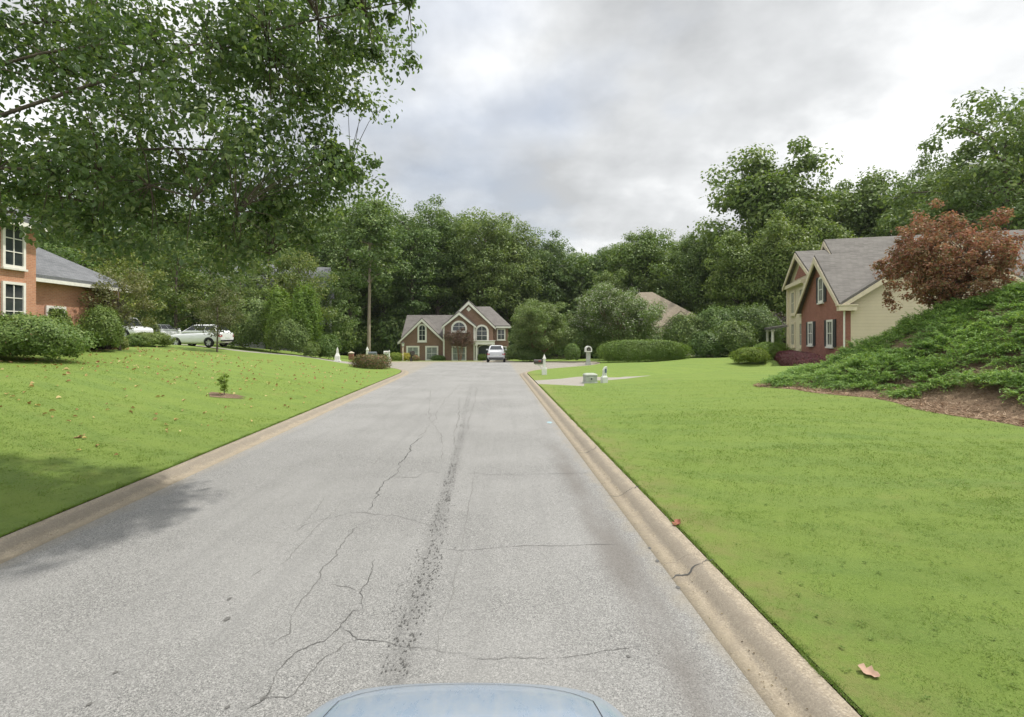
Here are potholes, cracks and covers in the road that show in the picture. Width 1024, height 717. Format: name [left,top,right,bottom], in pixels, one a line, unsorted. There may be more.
crack [246,383,640,711]
